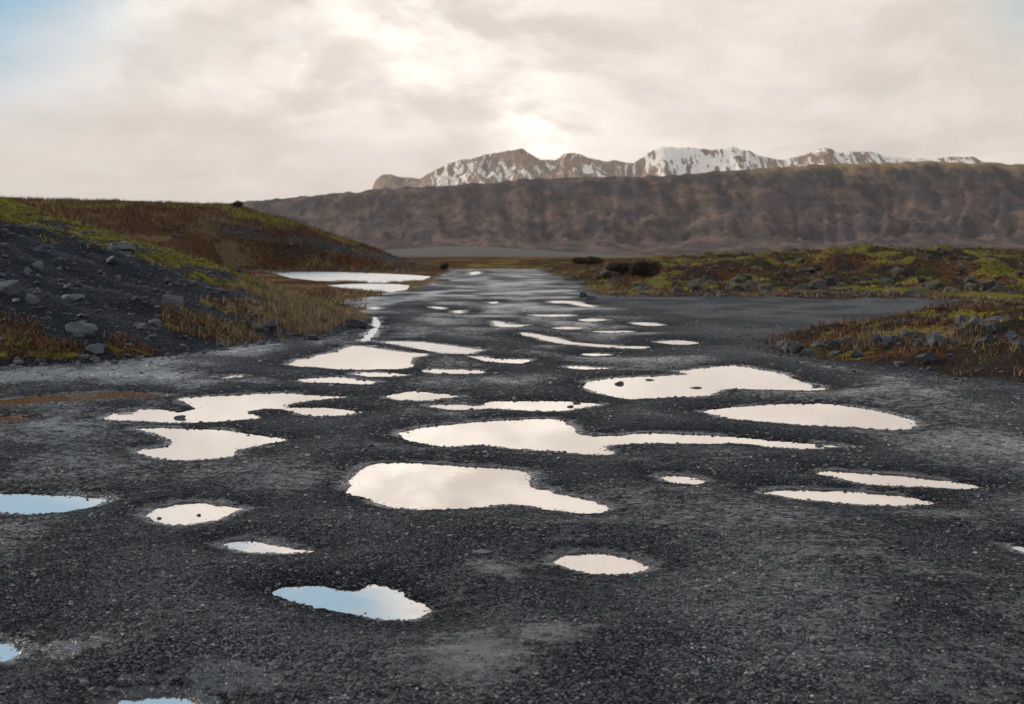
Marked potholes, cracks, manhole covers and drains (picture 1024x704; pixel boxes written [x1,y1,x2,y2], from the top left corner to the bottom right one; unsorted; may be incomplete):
pothole [761,488,935,506]
pothole [816,470,984,489]
pothole [661,474,706,484]
